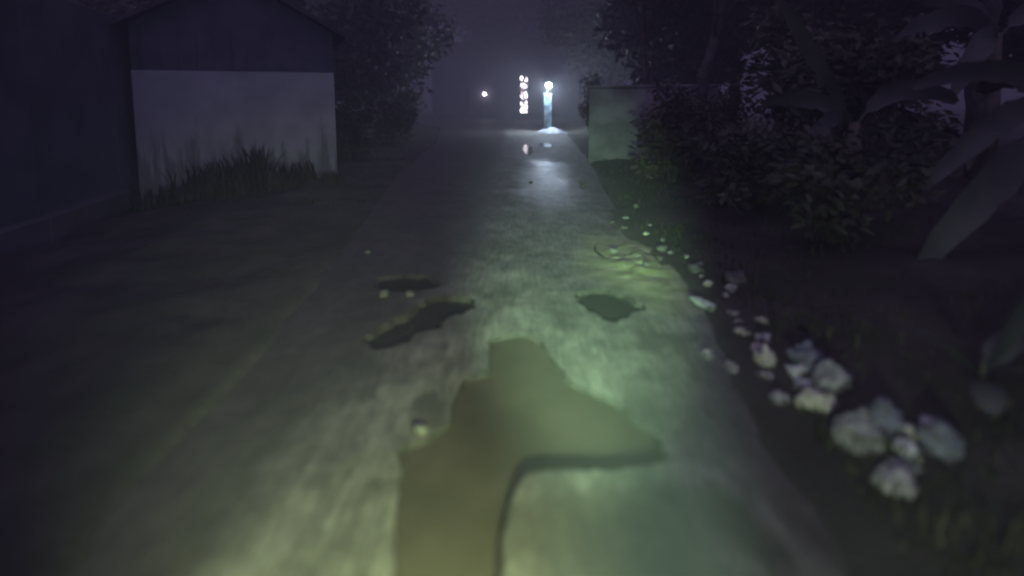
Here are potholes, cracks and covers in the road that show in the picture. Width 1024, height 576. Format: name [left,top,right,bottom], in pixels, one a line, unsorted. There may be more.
pothole [393,332,668,576]
crack [594,242,663,267]
pothole [574,288,647,323]
pothole [362,295,476,350]
pothole [374,274,441,292]
